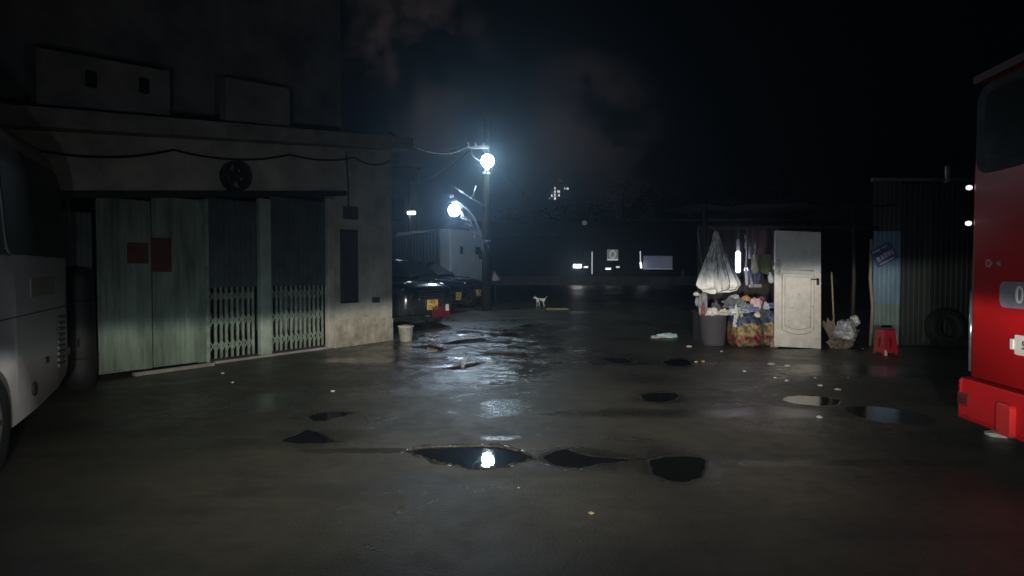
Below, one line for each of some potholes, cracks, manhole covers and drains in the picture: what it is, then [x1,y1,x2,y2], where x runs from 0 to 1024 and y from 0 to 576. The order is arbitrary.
pothole [647,453,710,483]
pothole [403,443,538,471]
pothole [534,447,639,469]
pothole [279,428,344,444]
